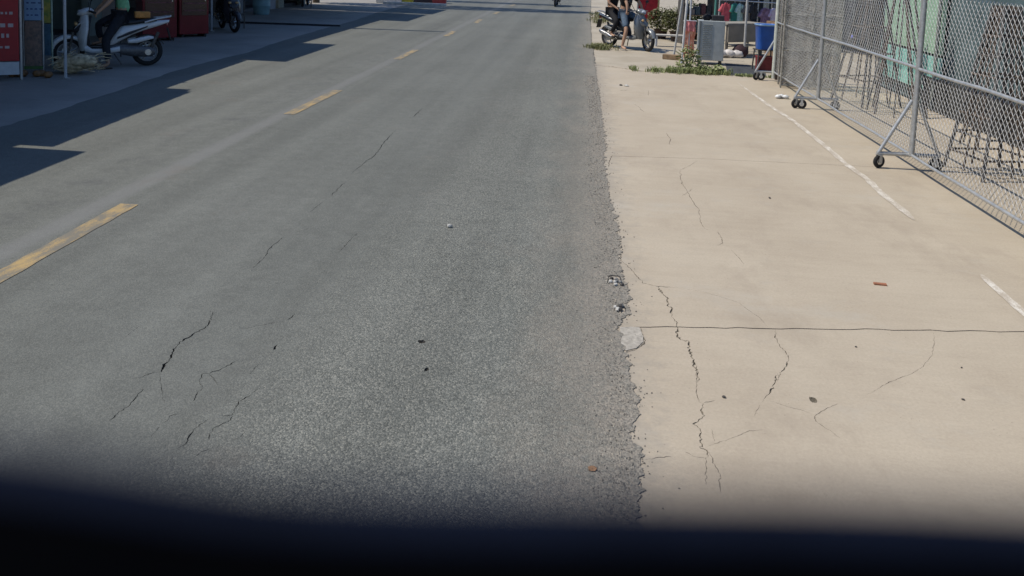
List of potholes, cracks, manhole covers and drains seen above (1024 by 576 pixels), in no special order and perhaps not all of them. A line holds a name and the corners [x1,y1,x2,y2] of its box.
crack [155,391,255,456]
crack [249,131,395,331]
crack [620,256,768,489]
crack [755,332,806,414]
crack [112,310,235,419]
